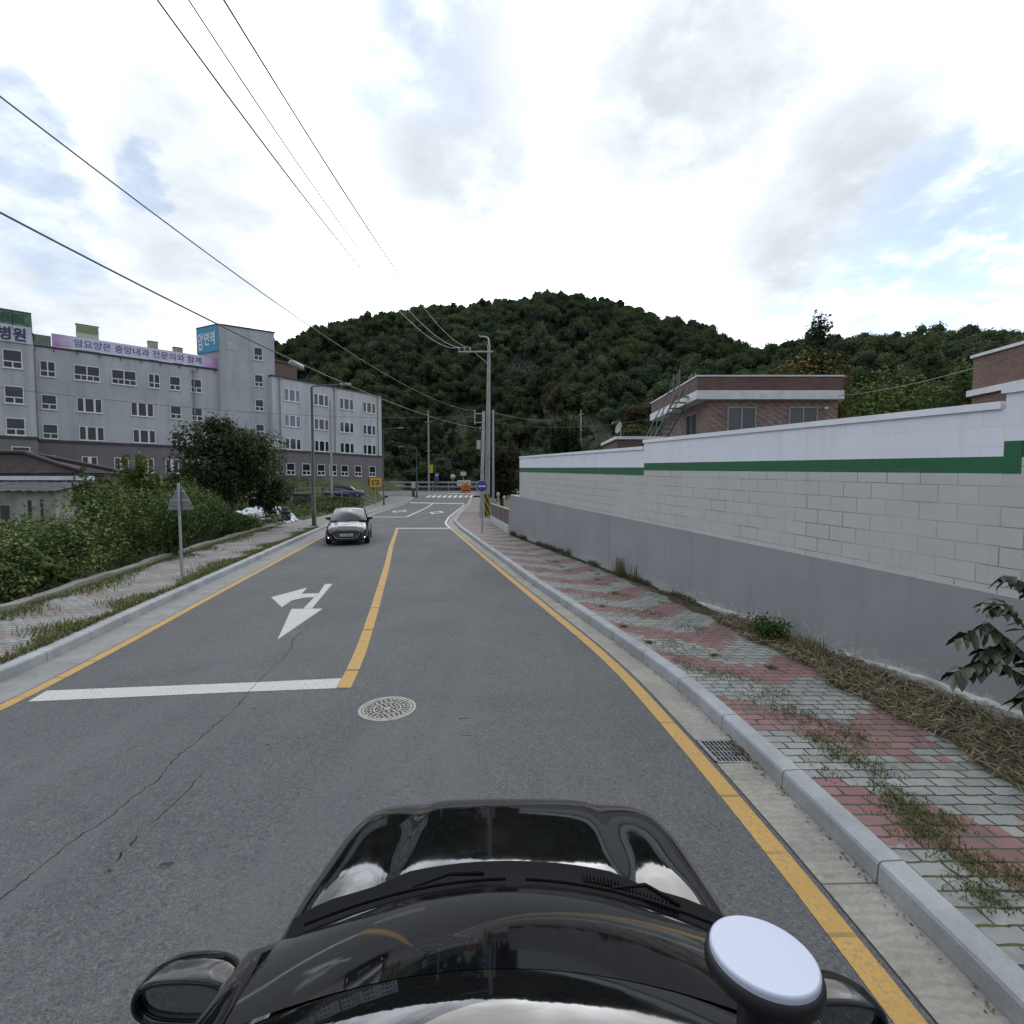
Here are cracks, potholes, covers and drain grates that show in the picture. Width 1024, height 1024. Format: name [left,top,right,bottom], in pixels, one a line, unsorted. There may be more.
crack [0,626,308,900]
manhole cover [358,696,416,721]
drain grate [697,740,755,763]
